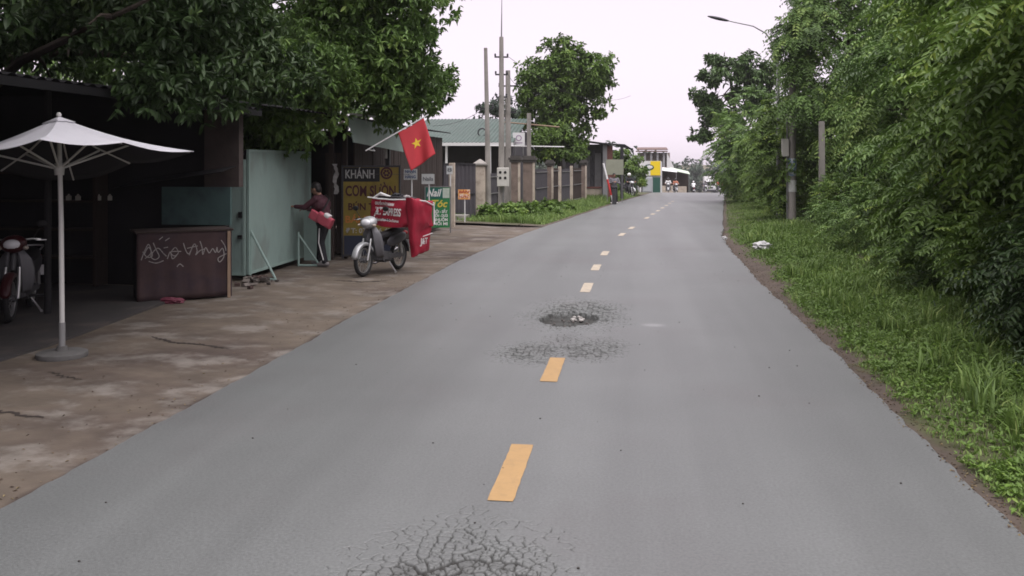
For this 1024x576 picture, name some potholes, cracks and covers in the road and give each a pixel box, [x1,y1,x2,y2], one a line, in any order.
crack [483,294,640,369]
crack [313,503,585,576]
pothole [537,311,599,327]
